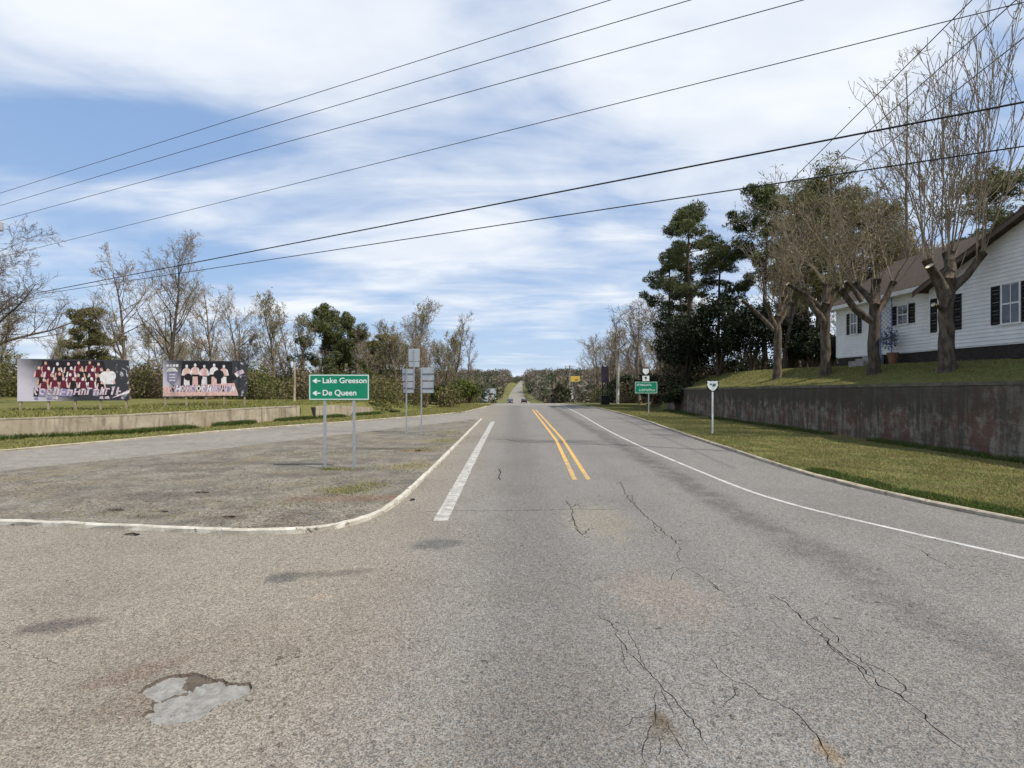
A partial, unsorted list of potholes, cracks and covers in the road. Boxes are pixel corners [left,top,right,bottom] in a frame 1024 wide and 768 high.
crack [770,593,969,755]
crack [616,482,724,593]
crack [595,614,708,760]
crack [710,639,829,765]
crack [426,501,604,538]
pothole [138,672,252,725]
